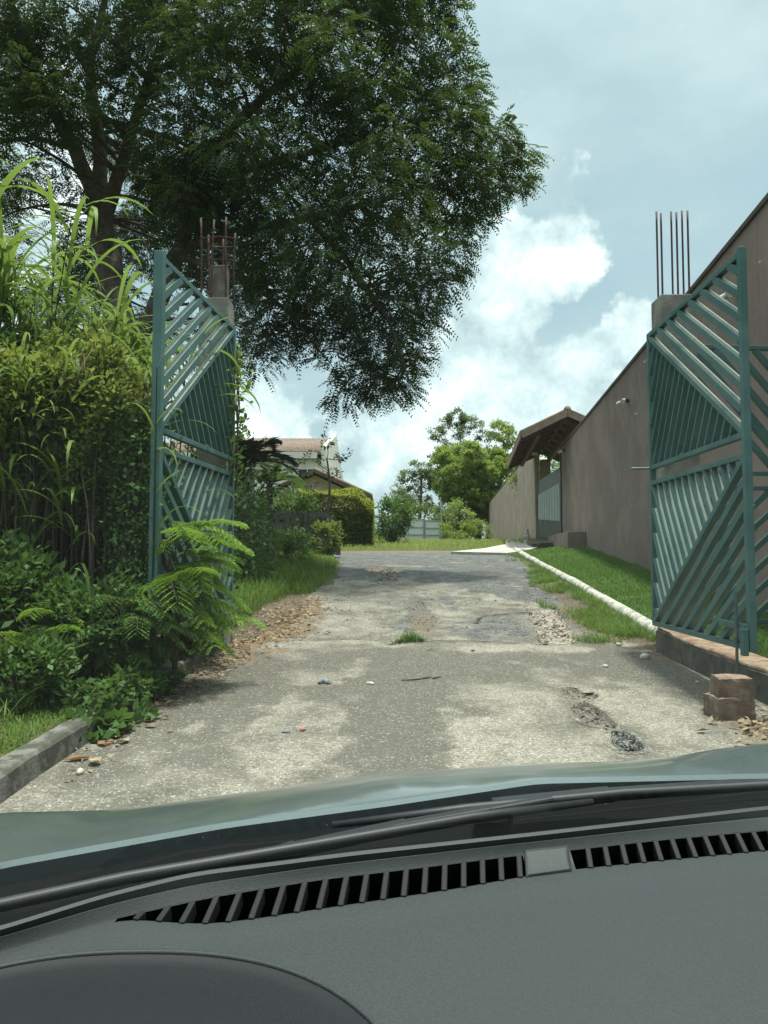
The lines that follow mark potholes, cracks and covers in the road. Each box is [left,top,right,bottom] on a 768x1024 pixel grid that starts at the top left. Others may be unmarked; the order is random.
pothole [565,699,622,730]
pothole [528,610,580,645]
pothole [552,685,605,703]
pothole [602,728,653,754]
